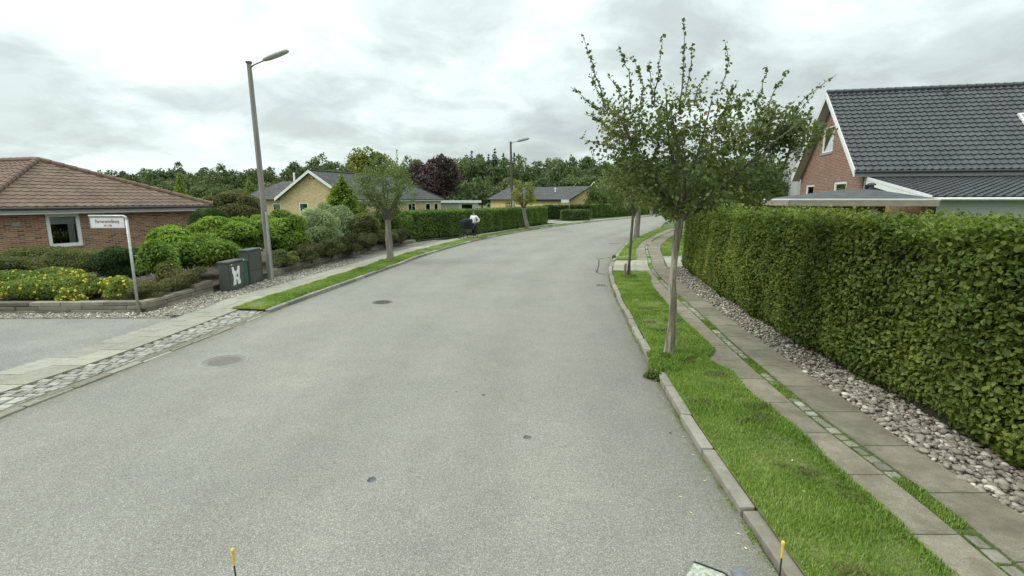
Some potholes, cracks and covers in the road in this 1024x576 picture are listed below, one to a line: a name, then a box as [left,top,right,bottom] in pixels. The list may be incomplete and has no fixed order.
manhole cover [198,354,250,369]
